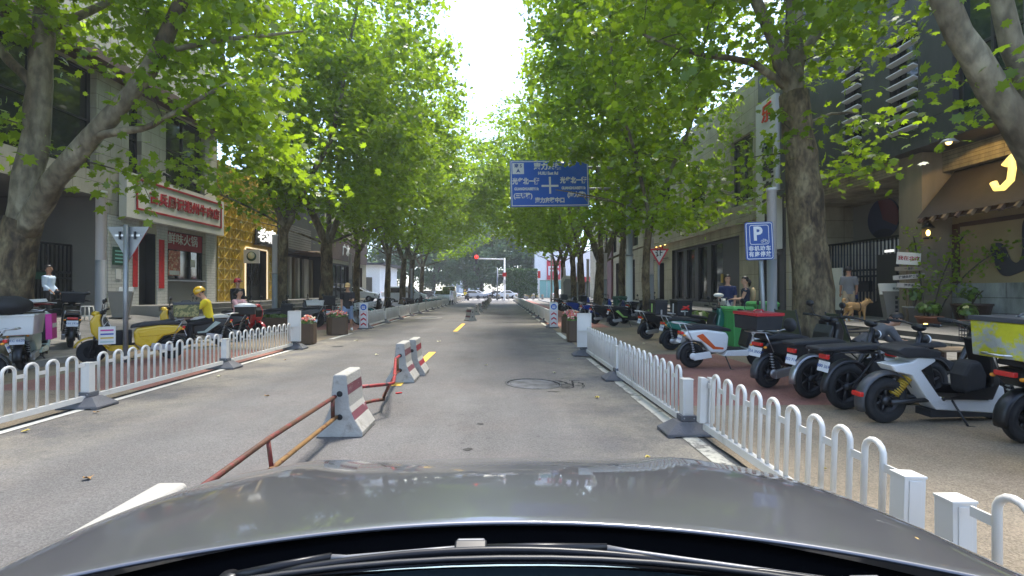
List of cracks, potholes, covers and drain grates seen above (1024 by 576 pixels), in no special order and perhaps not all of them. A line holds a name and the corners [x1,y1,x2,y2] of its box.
manhole cover [505,378,562,389]
